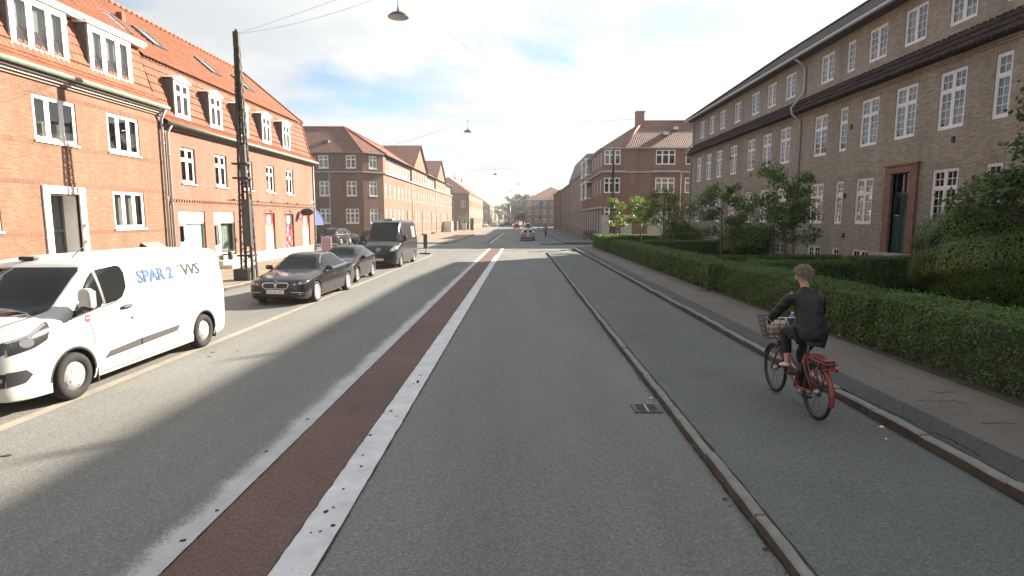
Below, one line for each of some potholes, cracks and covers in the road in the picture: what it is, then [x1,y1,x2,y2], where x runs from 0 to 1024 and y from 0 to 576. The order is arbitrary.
drain grate [630,404,663,413]
